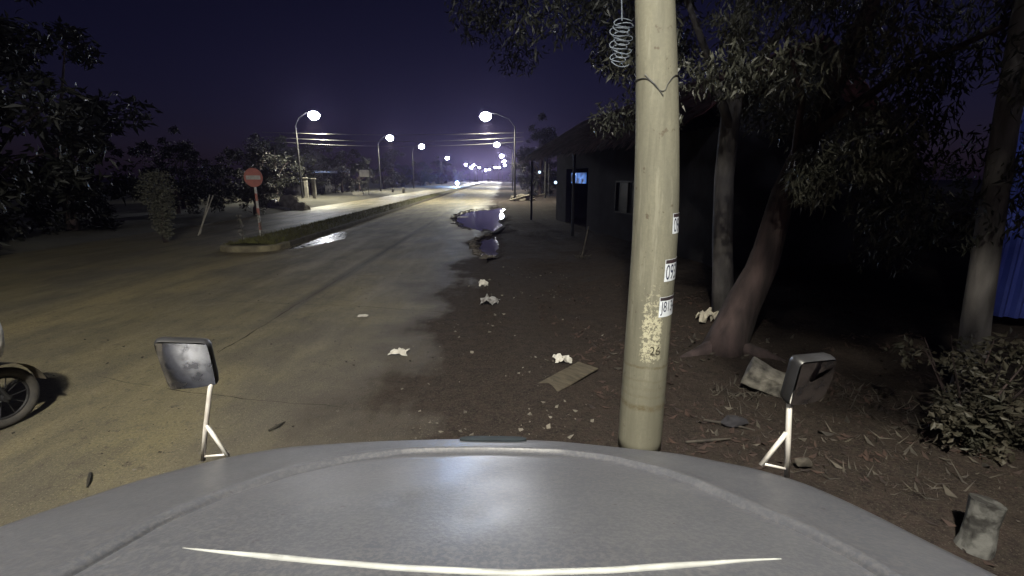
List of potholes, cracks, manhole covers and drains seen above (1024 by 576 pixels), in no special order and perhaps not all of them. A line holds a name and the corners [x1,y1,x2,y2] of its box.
pothole [450,207,509,233]
pothole [467,233,500,260]
